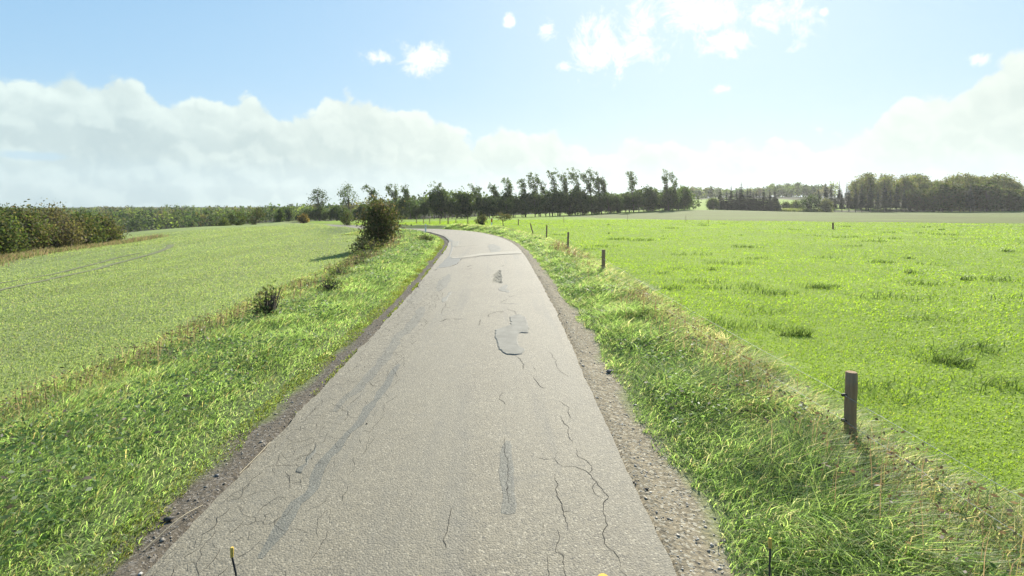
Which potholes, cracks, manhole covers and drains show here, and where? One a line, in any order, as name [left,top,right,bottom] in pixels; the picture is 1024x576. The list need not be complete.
crack [152,275,448,576]
crack [538,409,627,576]
